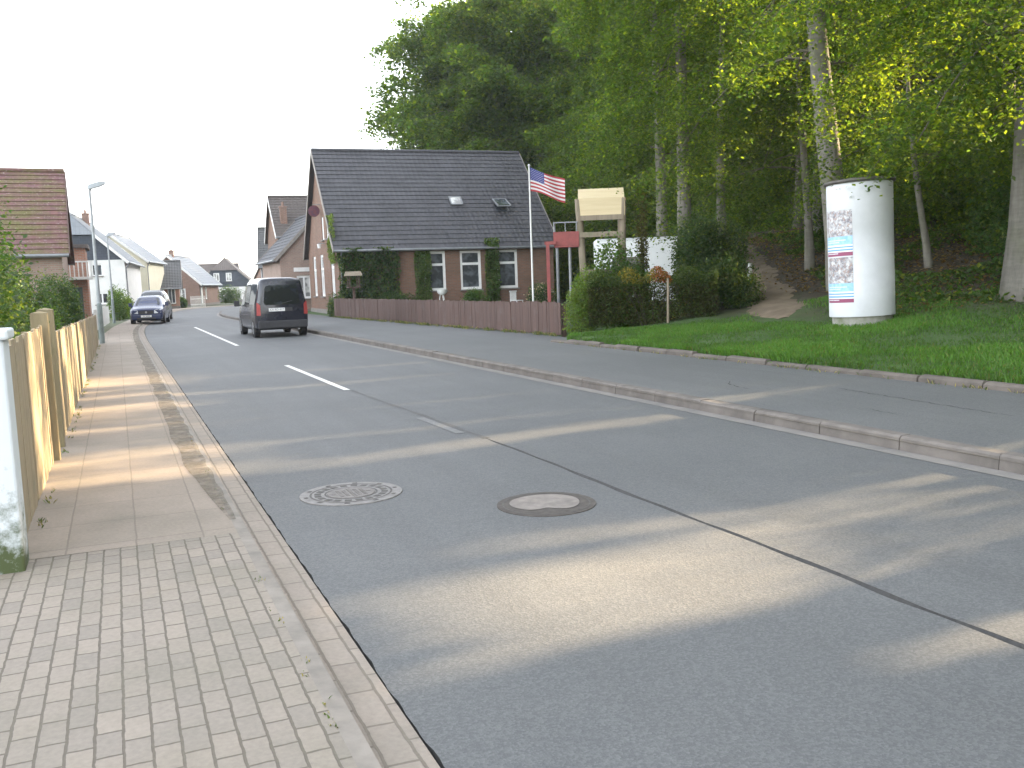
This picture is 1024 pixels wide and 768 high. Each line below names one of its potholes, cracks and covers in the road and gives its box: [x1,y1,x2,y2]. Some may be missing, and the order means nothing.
manhole cover [497,492,596,517]
crack [841,388,1012,416]
manhole cover [299,482,402,506]
